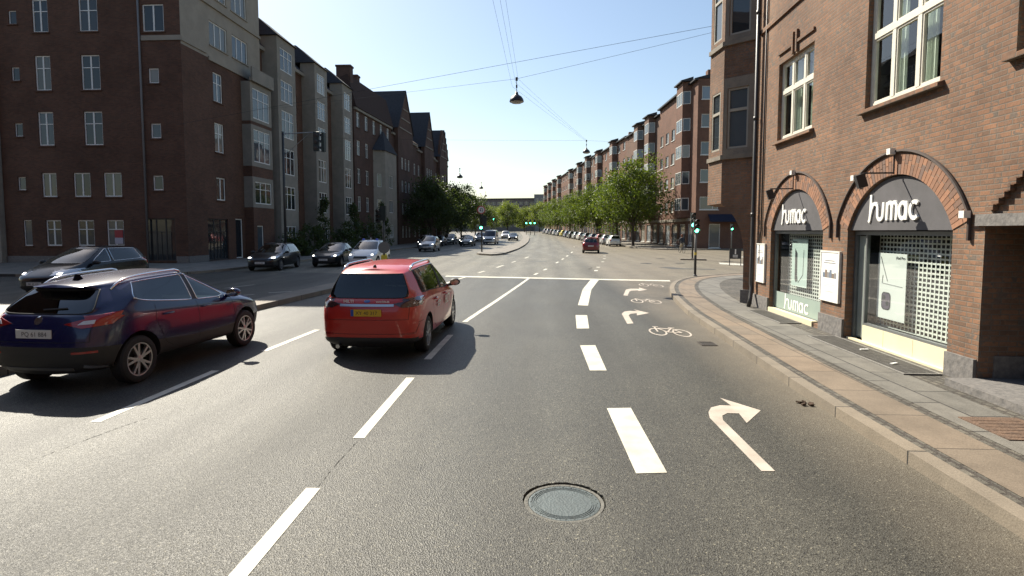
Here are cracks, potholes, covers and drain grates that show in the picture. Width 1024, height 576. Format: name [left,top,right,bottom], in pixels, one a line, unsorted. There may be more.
manhole cover [524,485,605,522]
